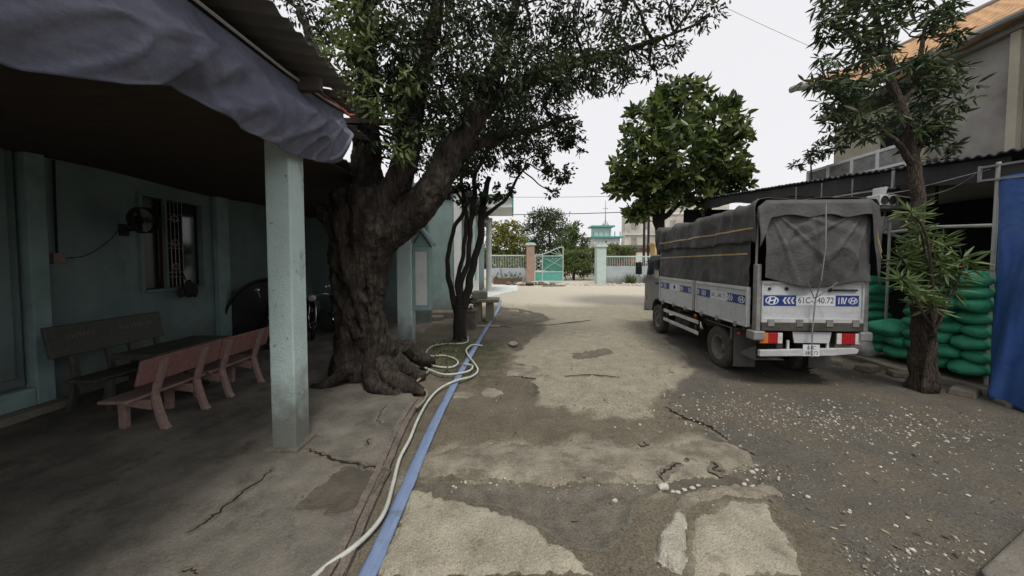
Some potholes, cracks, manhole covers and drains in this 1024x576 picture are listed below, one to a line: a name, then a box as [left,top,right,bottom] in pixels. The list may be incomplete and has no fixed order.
crack [510,363,538,380]
crack [638,406,757,482]
crack [304,403,390,472]
crack [185,467,276,535]
